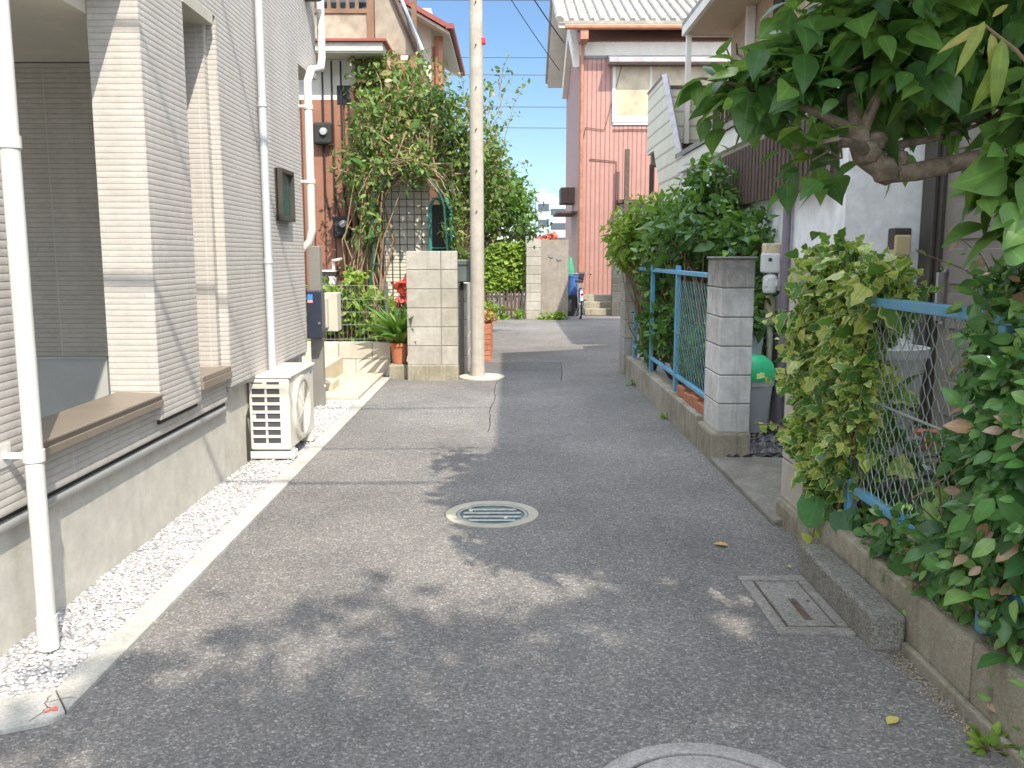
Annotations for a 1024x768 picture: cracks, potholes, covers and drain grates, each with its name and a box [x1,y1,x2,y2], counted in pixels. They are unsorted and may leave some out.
manhole cover [604,742,787,768]
crack [488,382,497,432]
